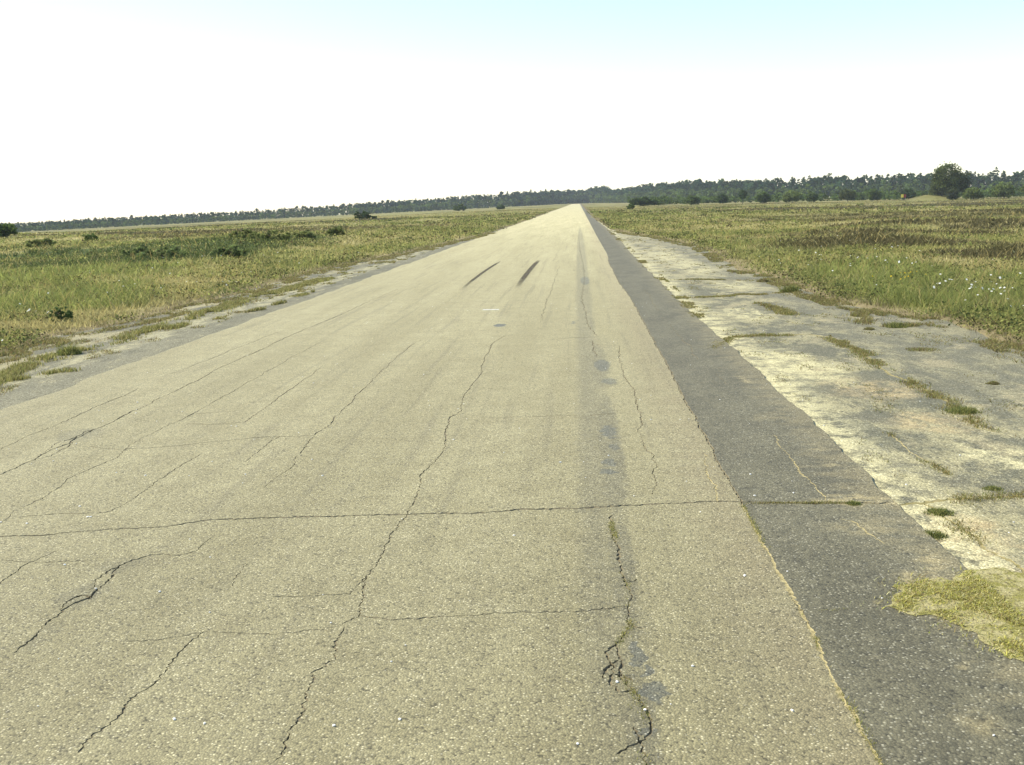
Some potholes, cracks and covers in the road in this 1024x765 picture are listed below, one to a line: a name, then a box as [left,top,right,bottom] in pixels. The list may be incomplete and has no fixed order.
crack [774,435,826,500]
crack [14,537,212,653]
crack [0,553,80,584]
crack [0,290,421,521]
crack [78,336,653,765]
